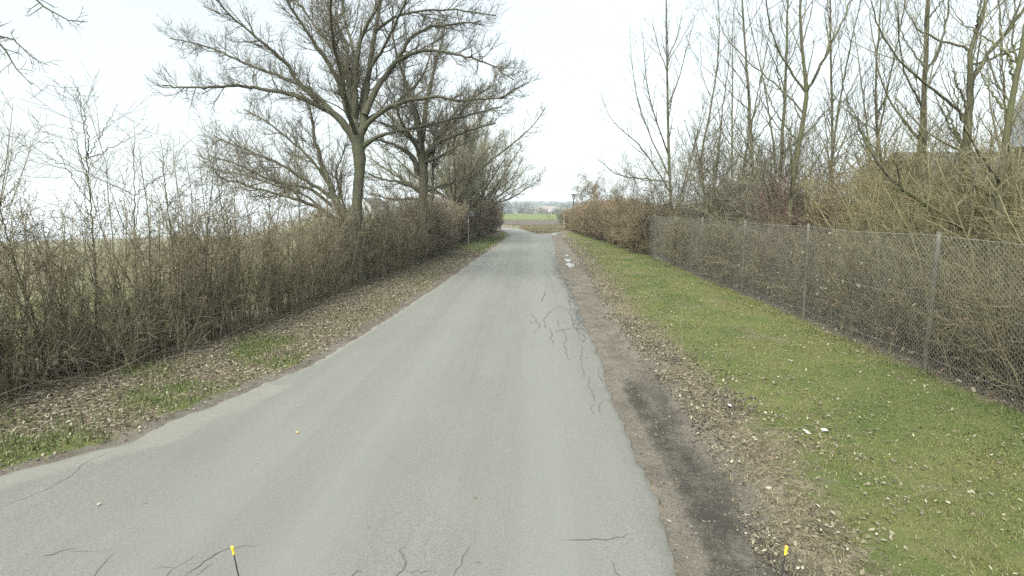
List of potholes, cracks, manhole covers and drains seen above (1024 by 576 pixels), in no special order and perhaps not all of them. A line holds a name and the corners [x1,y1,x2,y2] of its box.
crack [531,247,603,413]
crack [157,545,257,576]
